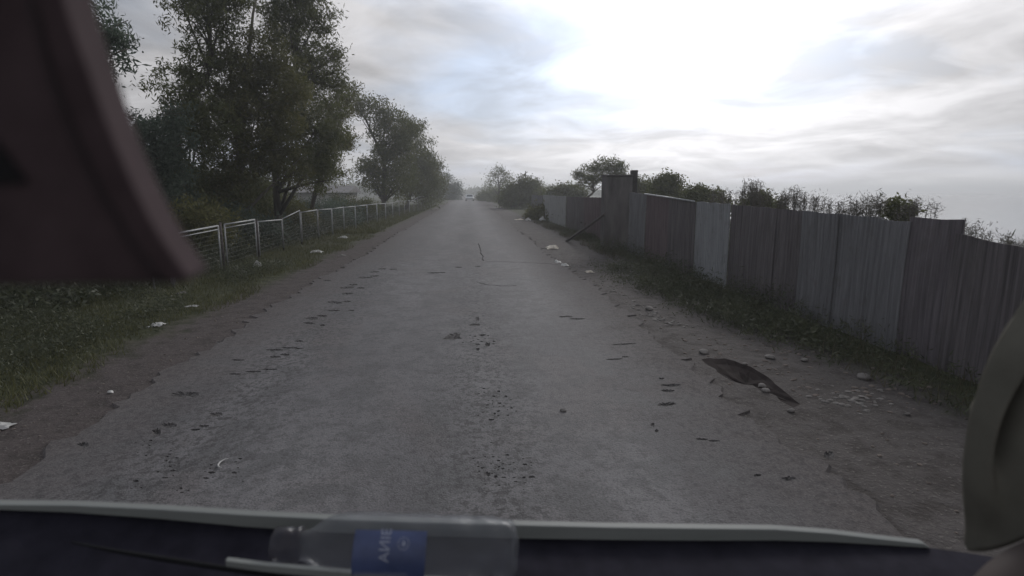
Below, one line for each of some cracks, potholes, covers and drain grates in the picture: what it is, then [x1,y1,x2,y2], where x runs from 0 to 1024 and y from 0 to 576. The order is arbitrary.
pothole [702,358,800,408]
pothole [473,442,535,490]
pothole [442,333,495,351]
pothole [152,422,177,436]
